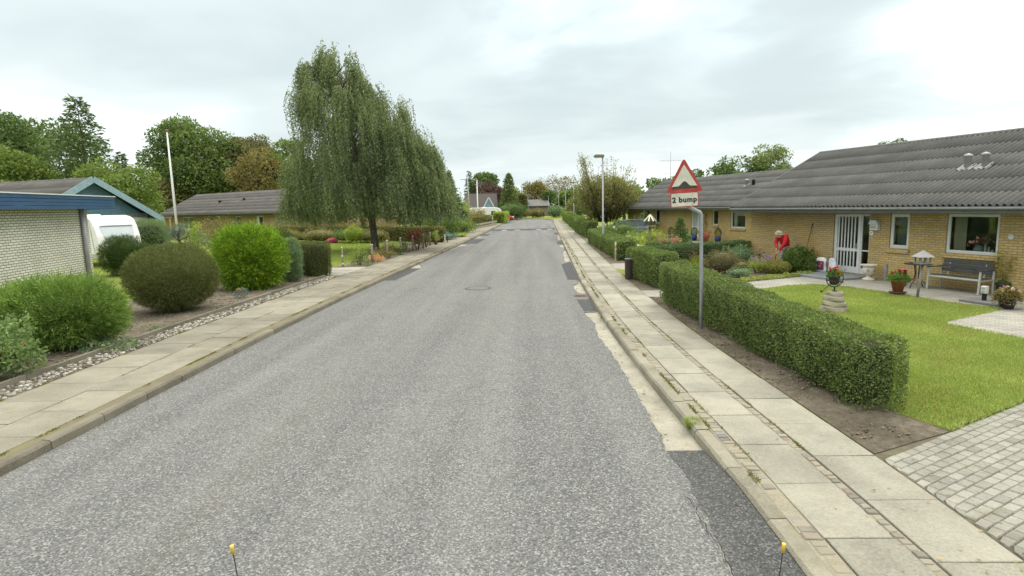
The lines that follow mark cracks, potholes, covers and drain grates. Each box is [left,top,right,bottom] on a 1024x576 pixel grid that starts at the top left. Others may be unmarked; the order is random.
crack [687,497,734,576]
